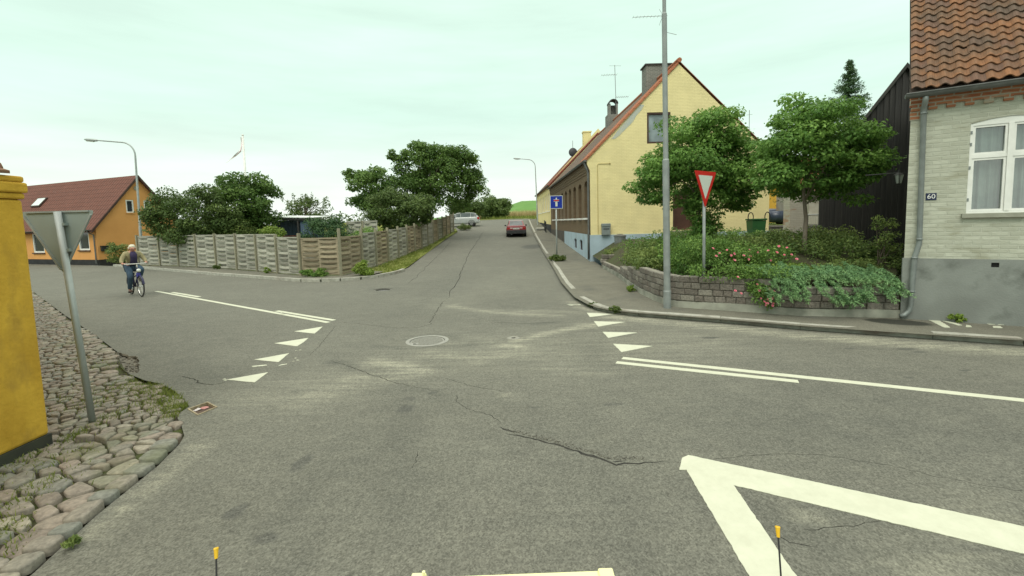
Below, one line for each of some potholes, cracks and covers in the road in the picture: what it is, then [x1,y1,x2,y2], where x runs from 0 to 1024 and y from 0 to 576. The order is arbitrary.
crack [456,397,662,466]
drain grate [188,401,217,416]
manhole cover [406,335,449,347]
crack [781,520,881,548]
pothole [116,352,140,376]
